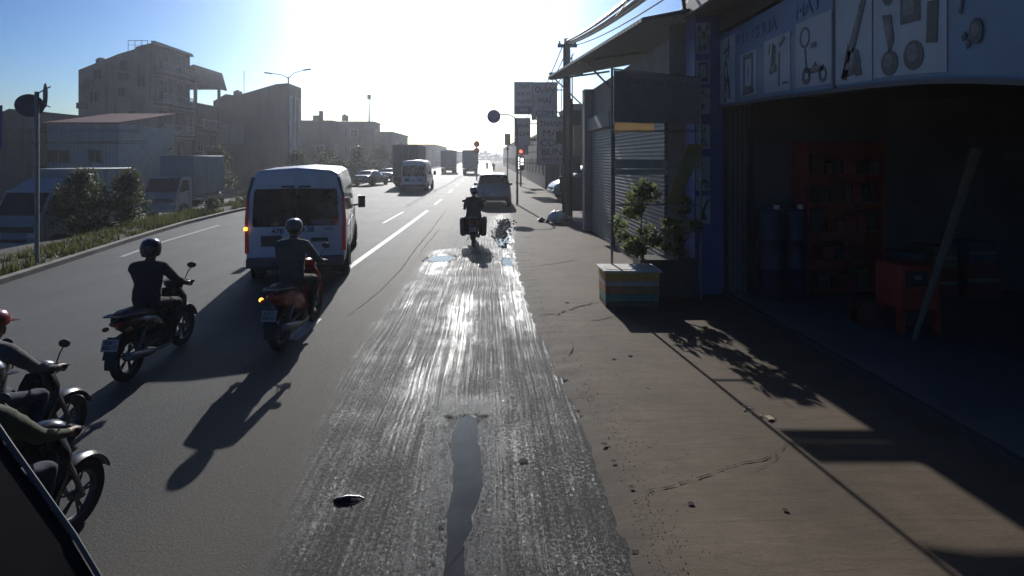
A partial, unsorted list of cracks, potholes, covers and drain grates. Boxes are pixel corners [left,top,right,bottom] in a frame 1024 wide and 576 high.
pothole [420,254,460,262]
pothole [415,411,512,576]
crack [533,302,612,320]
crack [639,445,785,503]
